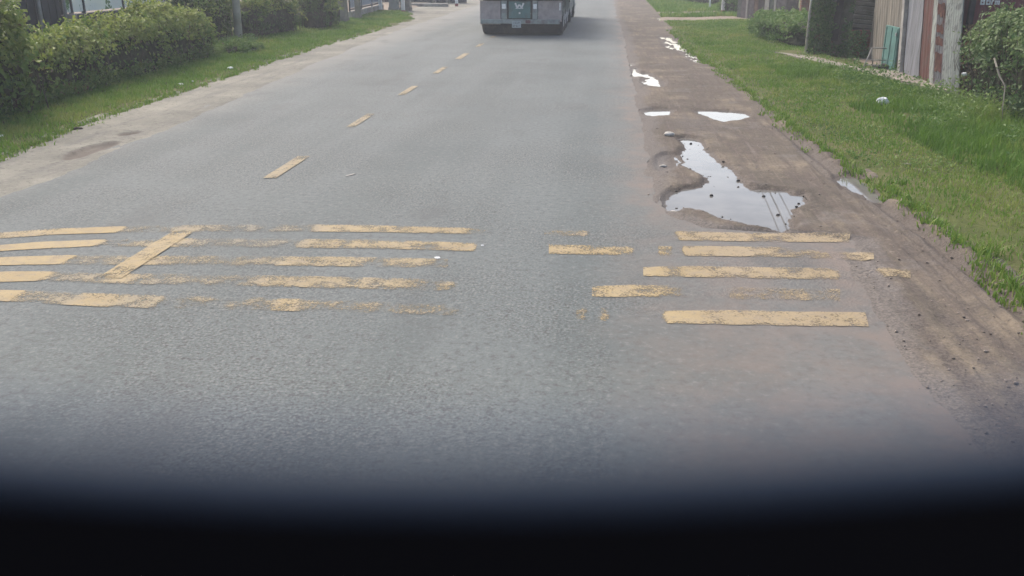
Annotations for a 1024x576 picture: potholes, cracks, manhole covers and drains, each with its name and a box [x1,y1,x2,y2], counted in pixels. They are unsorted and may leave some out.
pothole [651,135,815,232]
pothole [691,108,753,122]
pothole [827,171,887,205]
pothole [629,62,670,87]
